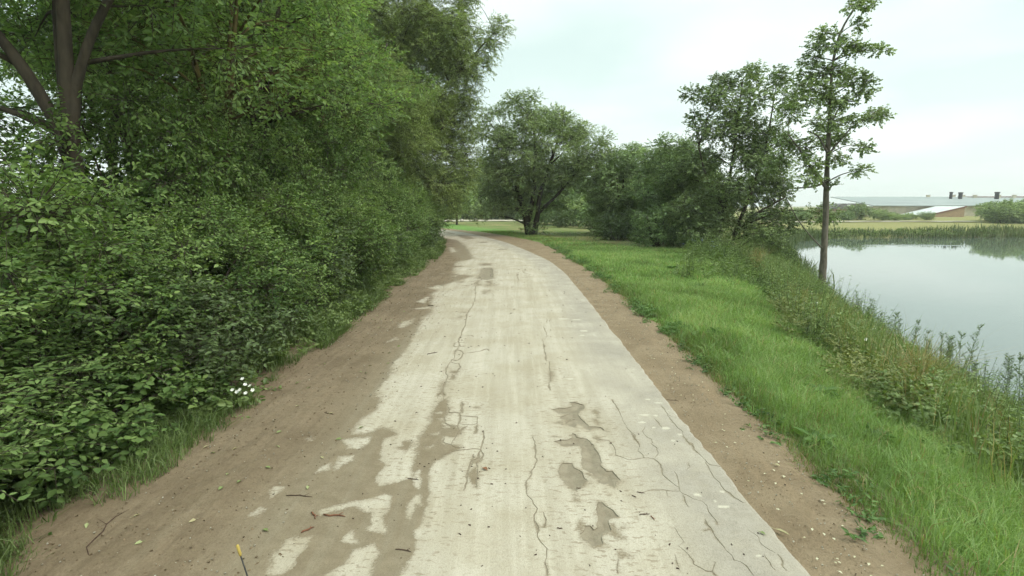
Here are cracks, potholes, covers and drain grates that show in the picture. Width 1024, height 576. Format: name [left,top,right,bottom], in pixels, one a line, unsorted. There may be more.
pothole [554,433,620,487]
crack [437,286,489,489]
crack [599,402,786,576]
pothole [552,402,603,430]
pothole [580,502,618,546]
crack [526,437,548,575]
